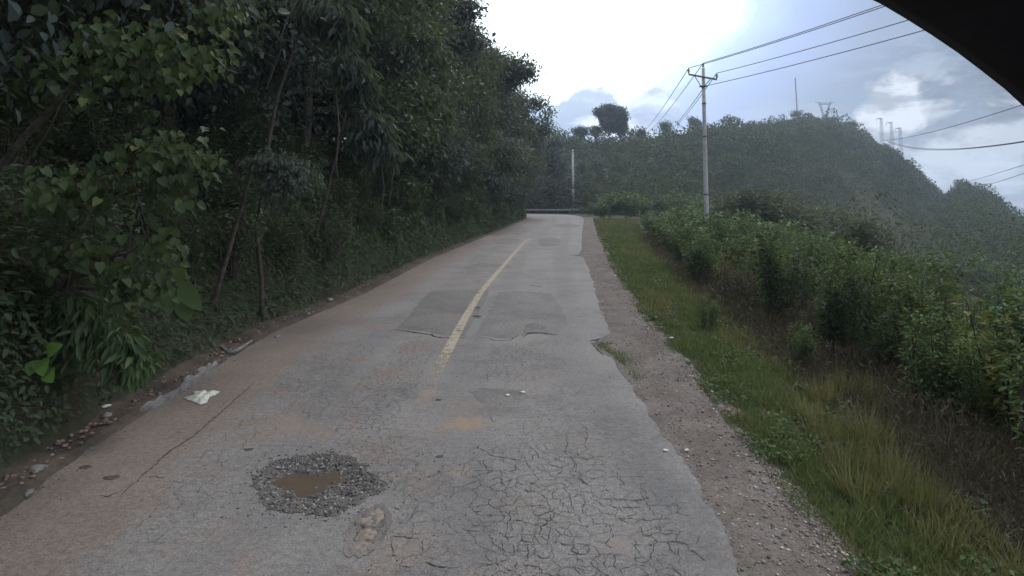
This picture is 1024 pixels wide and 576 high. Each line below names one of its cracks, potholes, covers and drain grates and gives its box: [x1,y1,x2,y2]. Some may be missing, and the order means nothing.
crack [102,330,703,576]
pothole [209,444,425,528]
